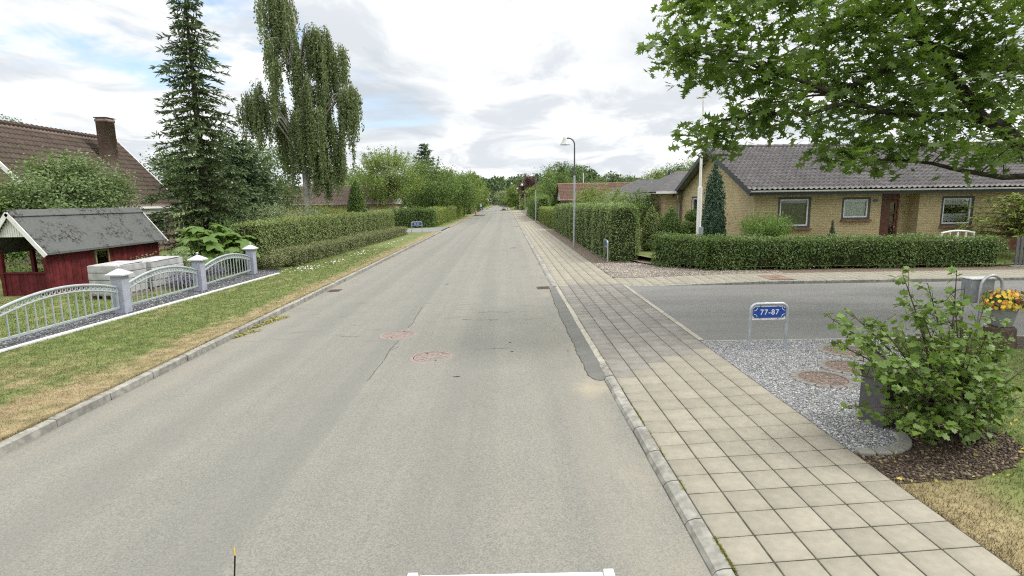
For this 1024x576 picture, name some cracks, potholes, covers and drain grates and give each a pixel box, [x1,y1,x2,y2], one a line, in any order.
manhole cover [409,351,453,363]
manhole cover [379,330,417,340]
